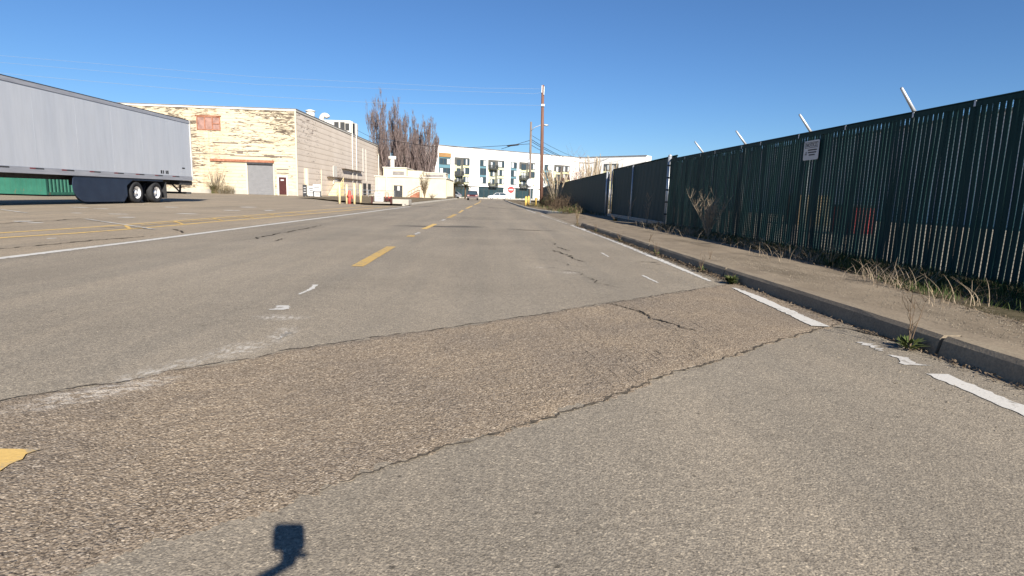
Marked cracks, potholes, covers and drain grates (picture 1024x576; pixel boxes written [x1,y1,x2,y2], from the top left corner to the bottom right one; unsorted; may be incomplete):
crack [0,285,716,401]
